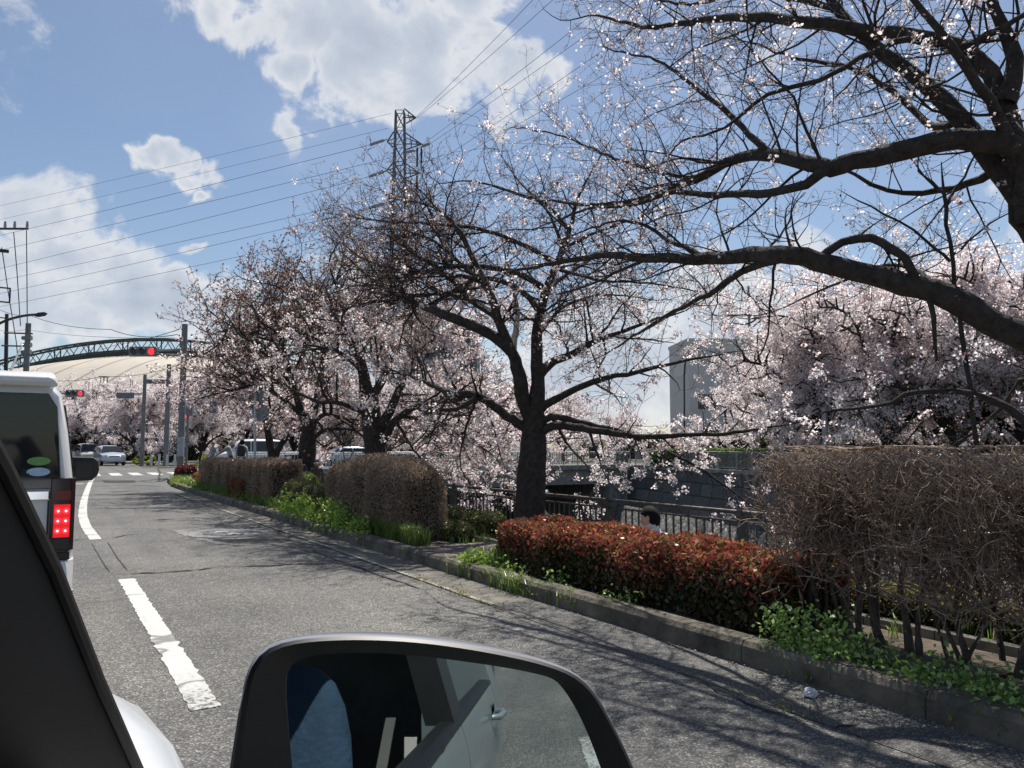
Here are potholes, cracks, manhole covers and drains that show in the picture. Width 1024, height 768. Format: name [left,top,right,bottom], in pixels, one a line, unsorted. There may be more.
manhole cover [187,529,268,538]
